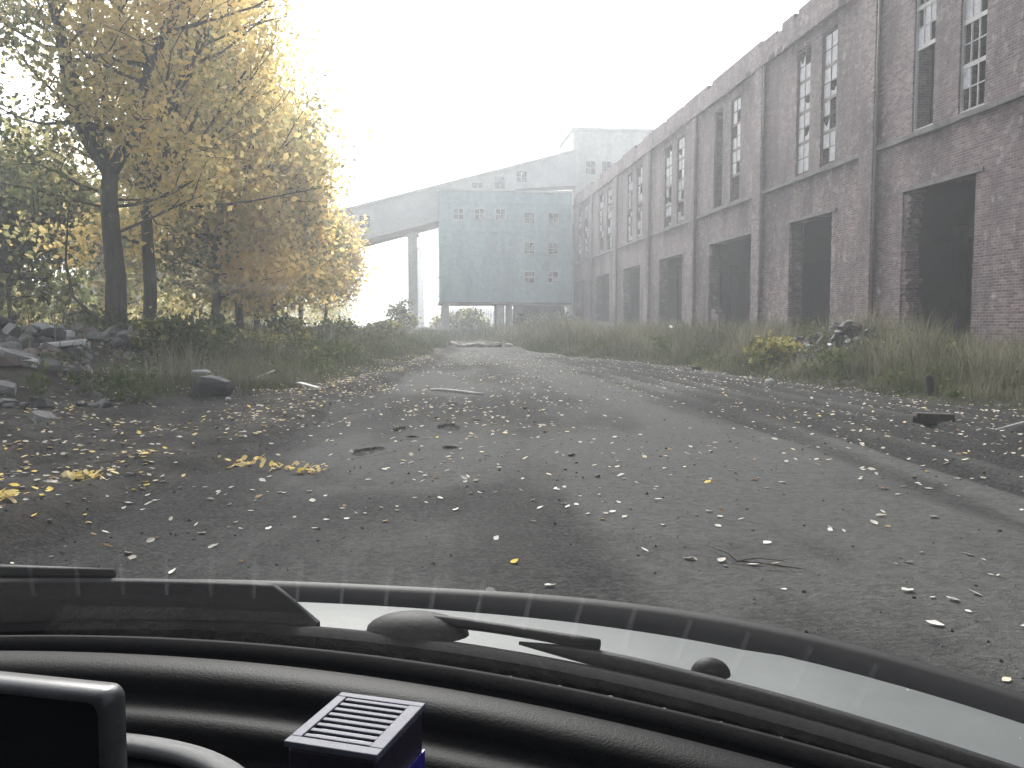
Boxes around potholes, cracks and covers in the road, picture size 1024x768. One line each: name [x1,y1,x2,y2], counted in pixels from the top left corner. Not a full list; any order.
pothole [338,445,398,458]
pothole [428,422,470,433]
